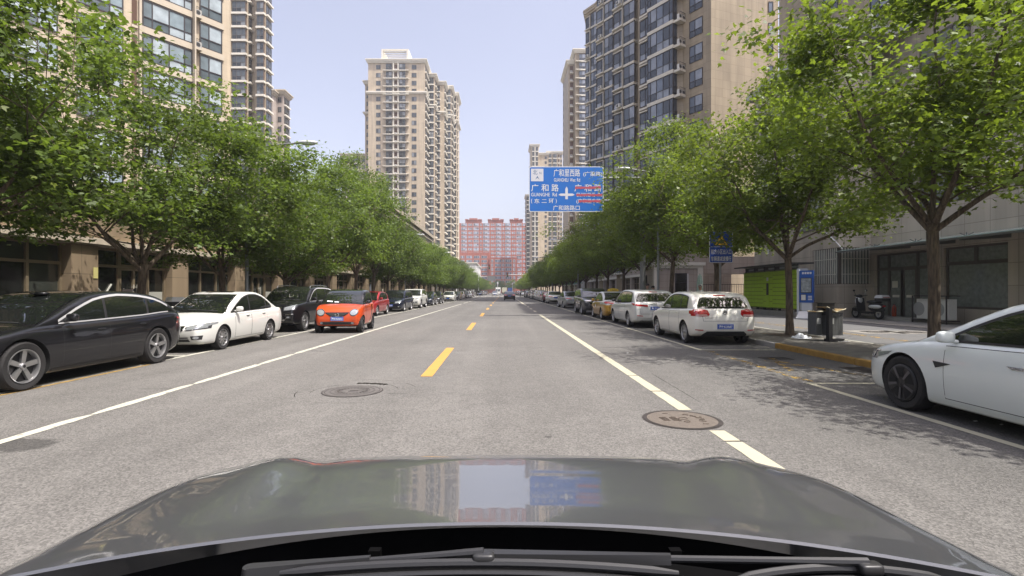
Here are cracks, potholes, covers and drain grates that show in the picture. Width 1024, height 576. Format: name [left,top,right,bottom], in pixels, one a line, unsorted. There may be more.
manhole cover [642,410,724,430]
manhole cover [321,385,383,397]
